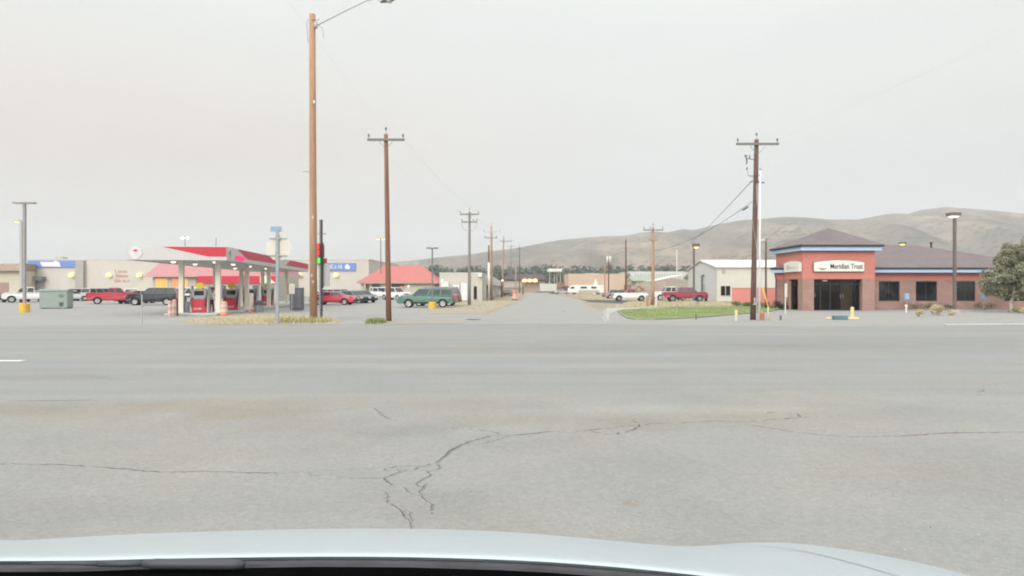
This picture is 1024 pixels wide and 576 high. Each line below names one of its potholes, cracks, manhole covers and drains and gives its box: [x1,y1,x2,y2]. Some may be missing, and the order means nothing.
crack [0,412,1024,529]
crack [372,407,397,421]
